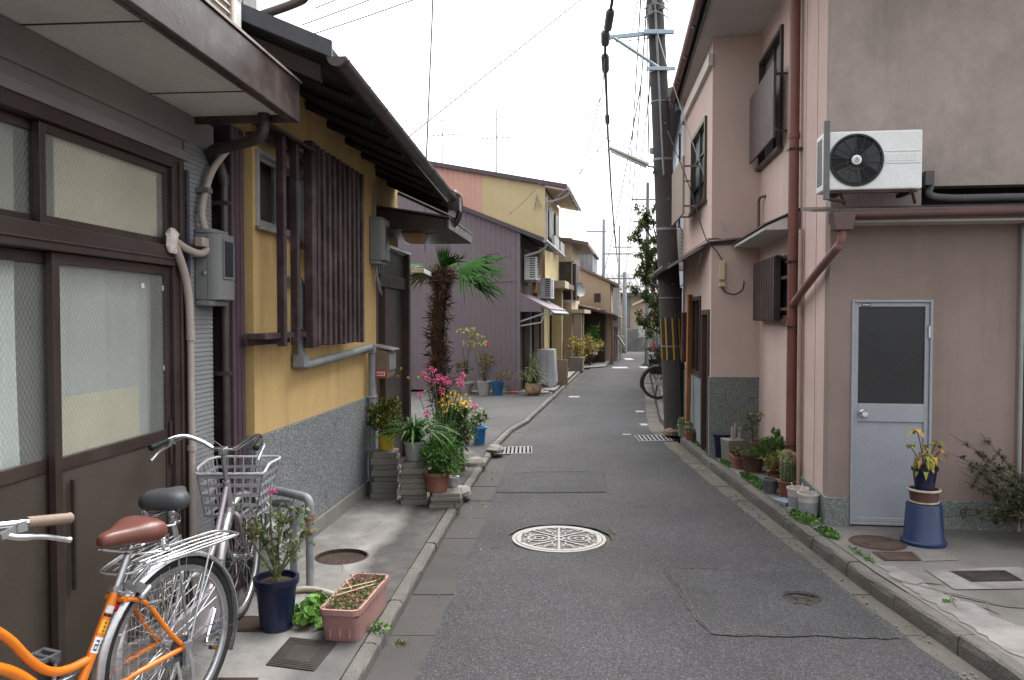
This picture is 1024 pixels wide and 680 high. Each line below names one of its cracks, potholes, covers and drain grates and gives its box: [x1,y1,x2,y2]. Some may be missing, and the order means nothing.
utility cover [266,637,338,672]
drain grate [496,446,532,455]
manhole cover [509,526,612,554]
manhole cover [848,535,908,551]
utility cover [872,552,921,561]
utility cover [775,589,829,608]
manhole cover [314,548,369,565]
drain grate [635,435,673,447]
